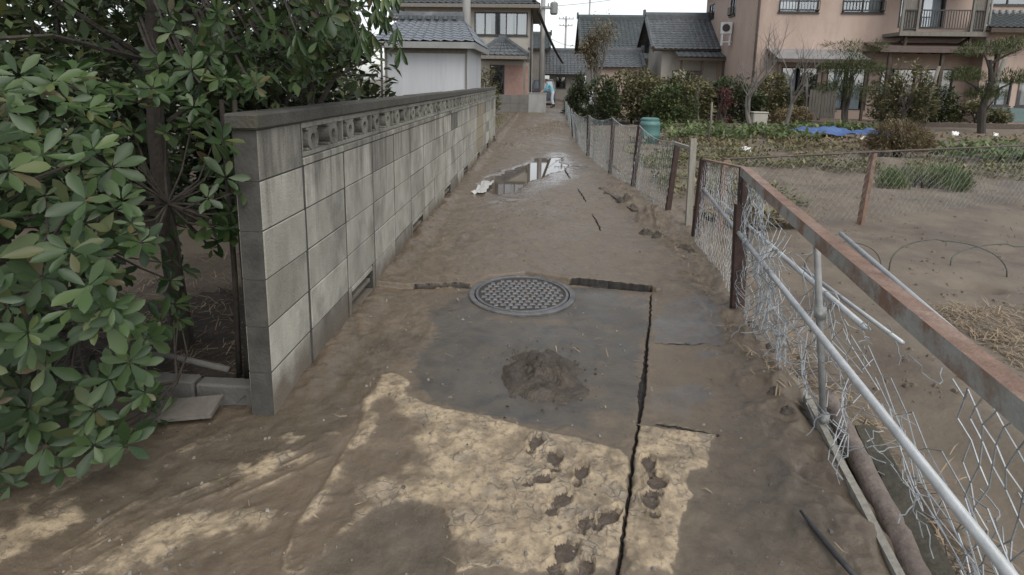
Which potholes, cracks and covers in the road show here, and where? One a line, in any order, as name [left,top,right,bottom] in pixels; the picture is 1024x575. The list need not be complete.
manhole cover [469,275,575,317]
crack [571,278,717,575]
